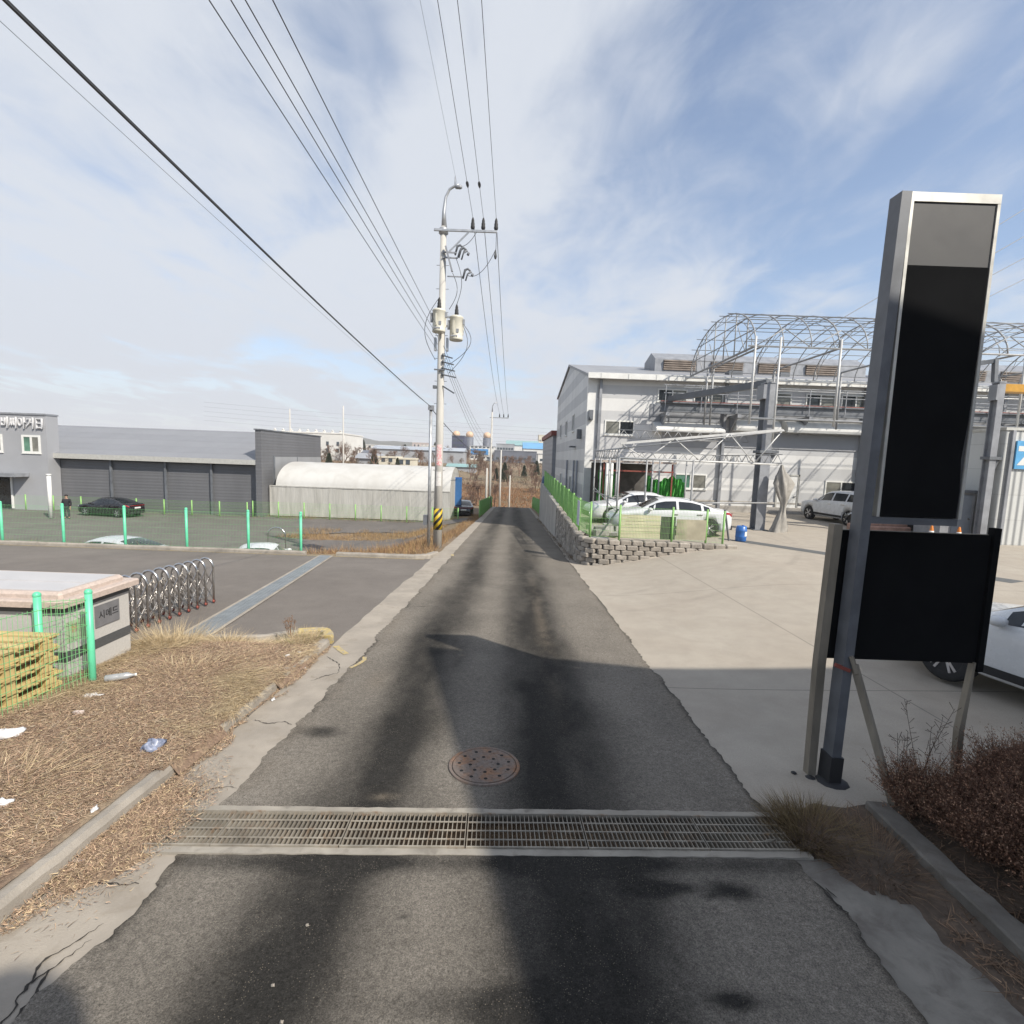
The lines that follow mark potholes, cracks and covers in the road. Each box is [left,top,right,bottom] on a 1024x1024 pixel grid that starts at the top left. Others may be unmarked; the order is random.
drain grate [141,809,237,846]
manhole cover [448,747,520,787]
drain grate [466,812,588,850]
crack [0,924,102,1024]
drain grate [580,814,710,851]
drain grate [210,810,353,848]
drain grate [339,811,467,849]
drain grate [691,815,800,851]
